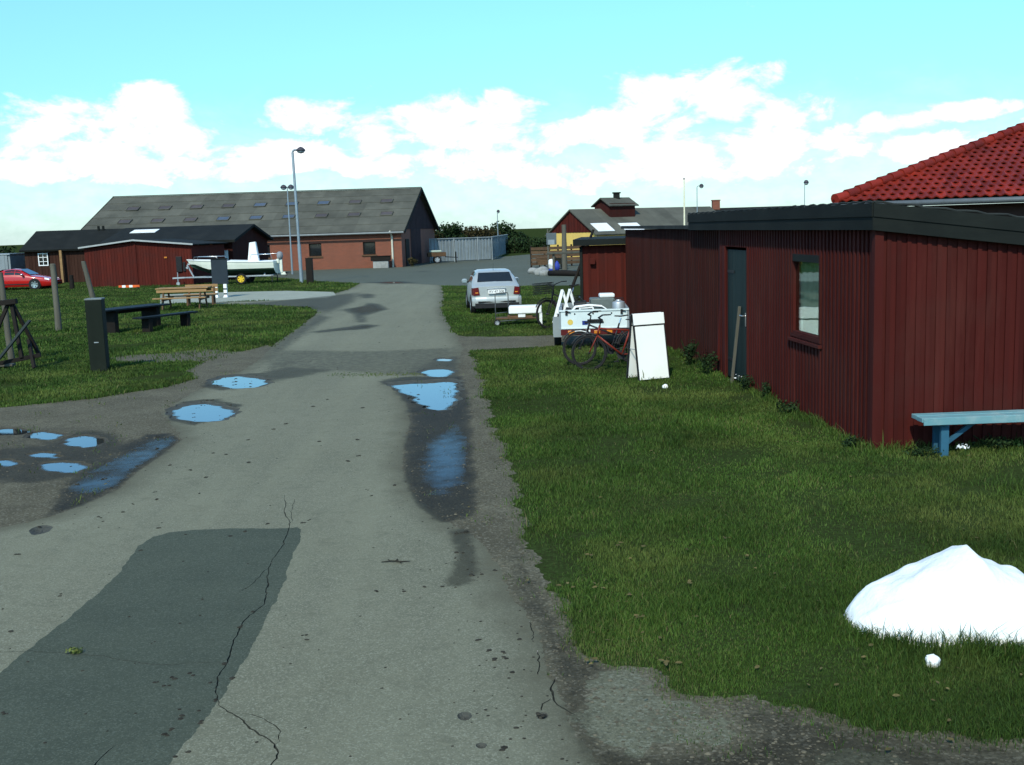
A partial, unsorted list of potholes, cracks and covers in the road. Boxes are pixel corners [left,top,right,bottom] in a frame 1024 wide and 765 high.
crack [9,495,295,765]
pothole [35,460,92,473]
pothole [29,525,53,535]
pothole [384,378,465,411]
pothole [205,374,274,389]
pothole [0,458,25,467]
crack [529,621,575,715]
pothole [0,427,34,435]
pothole [25,451,64,459]
pothole [165,401,243,422]
pothole [58,434,109,448]
pothole [22,430,67,440]
